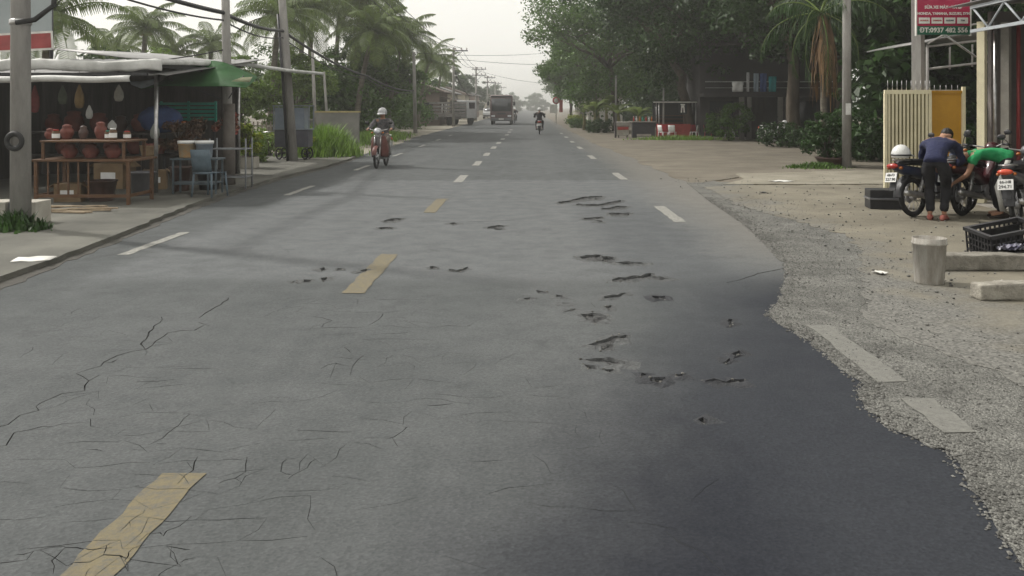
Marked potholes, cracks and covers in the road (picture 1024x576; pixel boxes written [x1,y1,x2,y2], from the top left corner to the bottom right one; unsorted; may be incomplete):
pothole [643,294,674,302]
pothole [631,372,696,389]
crack [0,296,729,576]
pothole [286,267,346,284]
pothole [578,333,633,352]
pothole [579,357,642,374]
pothole [717,349,755,365]
pothole [573,254,654,267]
pothole [605,273,681,283]
pothole [597,292,635,301]
pothole [577,216,608,224]
pothole [555,195,631,211]
